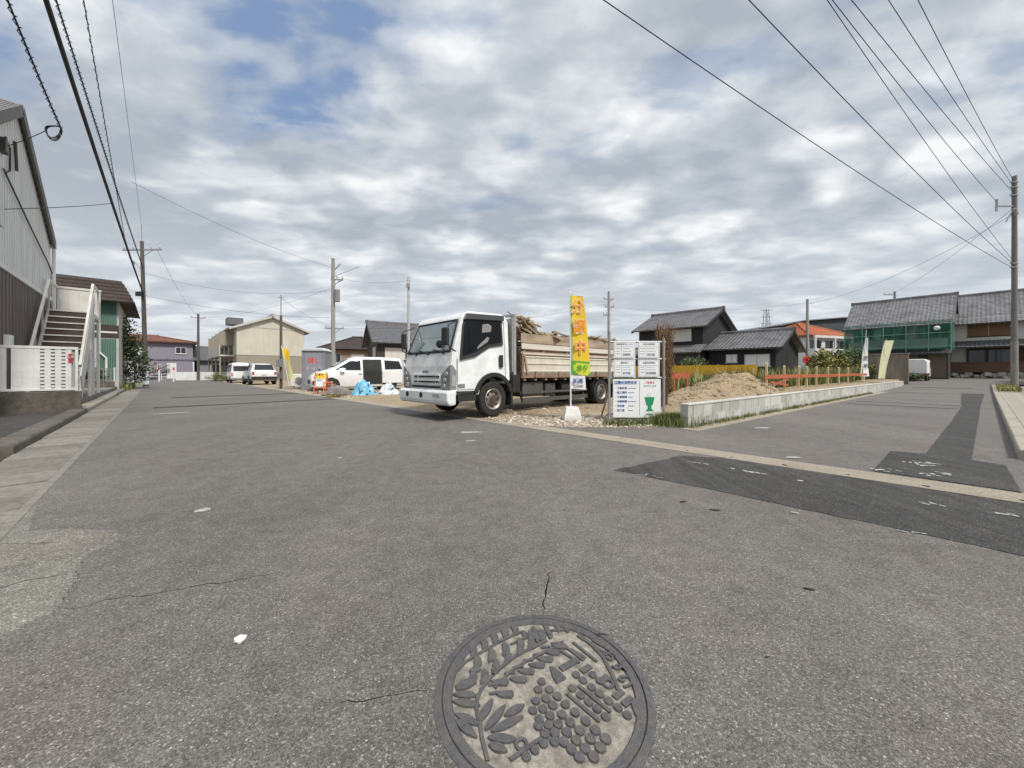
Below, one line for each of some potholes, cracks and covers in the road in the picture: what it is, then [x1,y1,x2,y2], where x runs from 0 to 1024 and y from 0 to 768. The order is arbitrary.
crack [332,690,429,706]
crack [66,573,276,609]
manhole cover [434,615,656,768]
